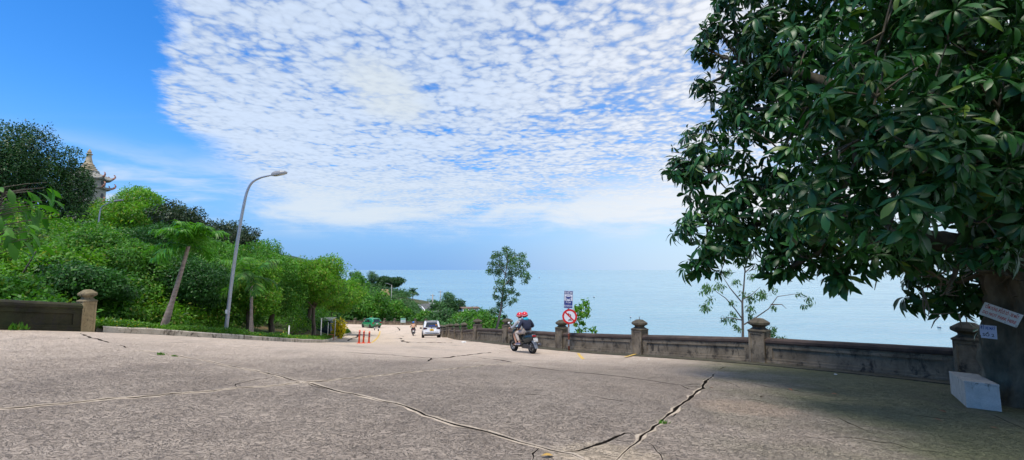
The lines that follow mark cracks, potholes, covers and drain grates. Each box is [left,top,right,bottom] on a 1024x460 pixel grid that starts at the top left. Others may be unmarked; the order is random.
crack [347,327,827,460]
